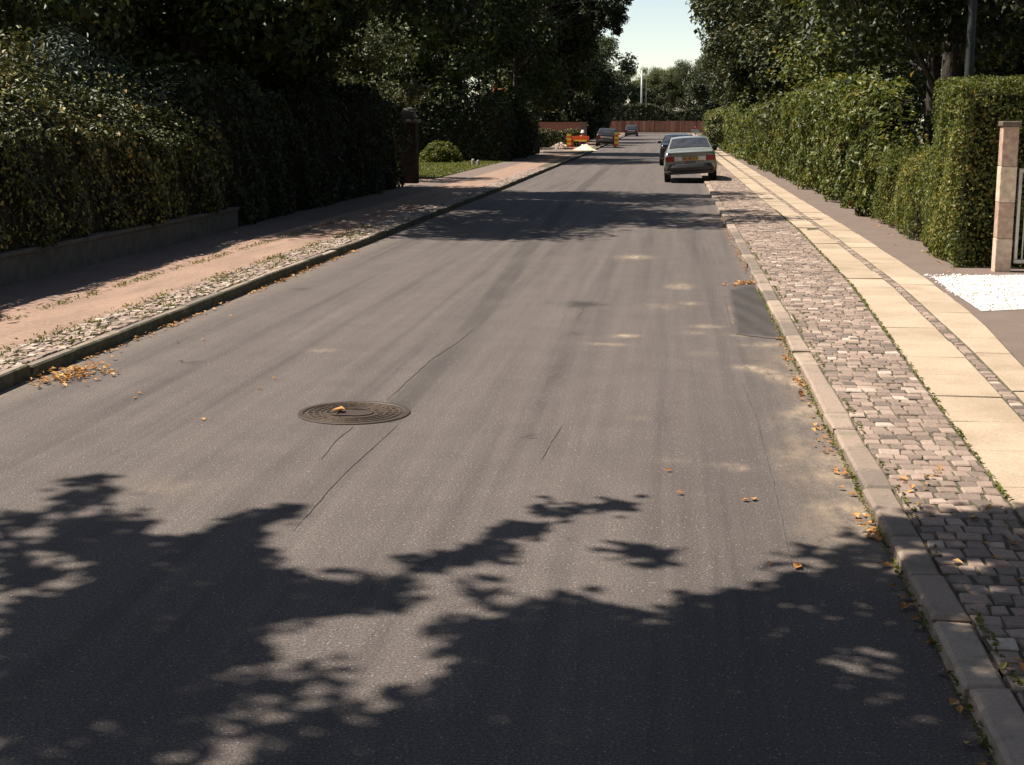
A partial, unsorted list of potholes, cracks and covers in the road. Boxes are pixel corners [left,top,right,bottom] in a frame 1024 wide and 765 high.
crack [741,381,792,564]
manhole cover [297,401,410,425]
crack [293,425,397,531]
crack [392,333,468,395]
